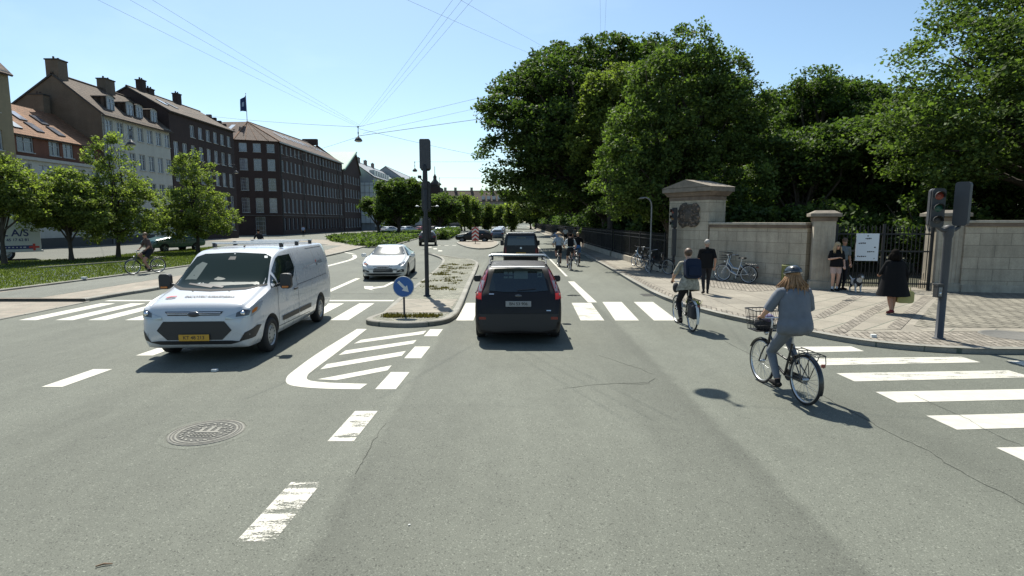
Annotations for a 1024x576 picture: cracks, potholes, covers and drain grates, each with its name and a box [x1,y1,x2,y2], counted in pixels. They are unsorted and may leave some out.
manhole cover [157,418,253,449]
